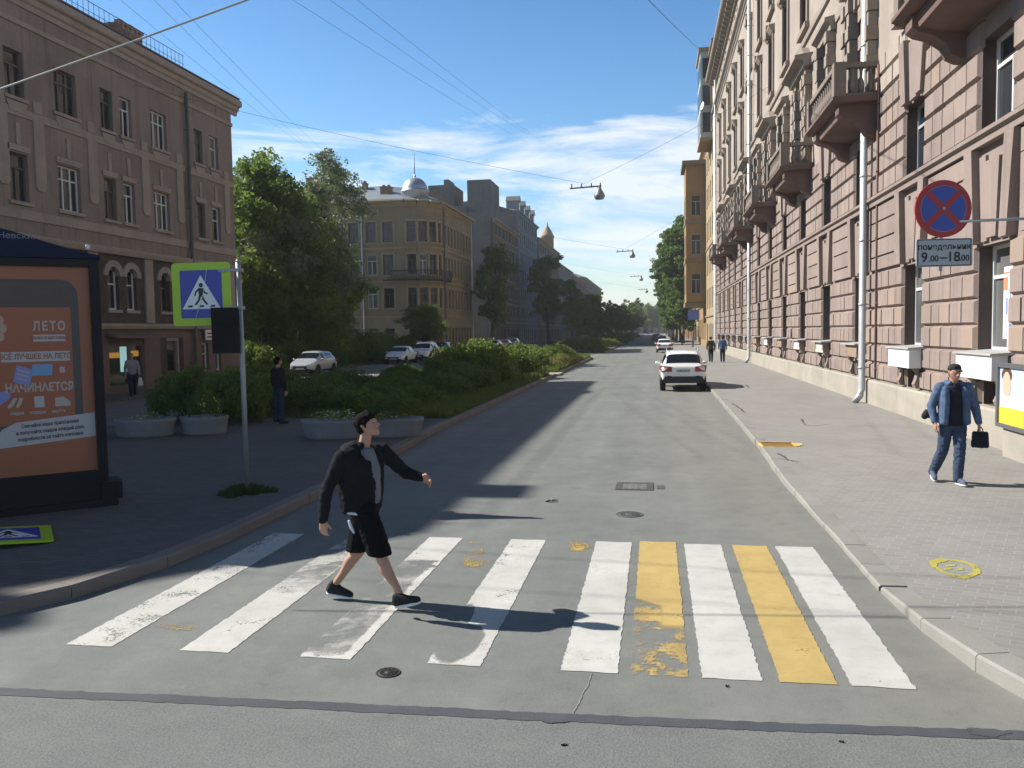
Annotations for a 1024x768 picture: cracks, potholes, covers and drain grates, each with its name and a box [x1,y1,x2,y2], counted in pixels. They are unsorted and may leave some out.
manhole cover [376,667,401,678]
crack [572,673,593,714]
